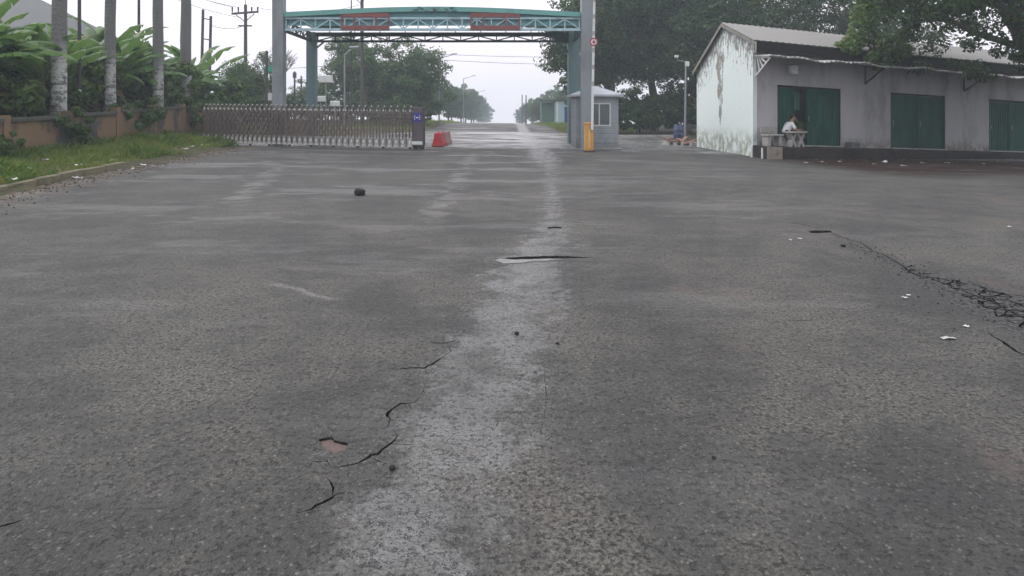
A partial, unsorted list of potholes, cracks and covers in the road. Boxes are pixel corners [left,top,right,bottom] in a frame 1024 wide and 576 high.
crack [298,339,457,513]
crack [988,332,1024,355]
pothole [318,437,348,453]
